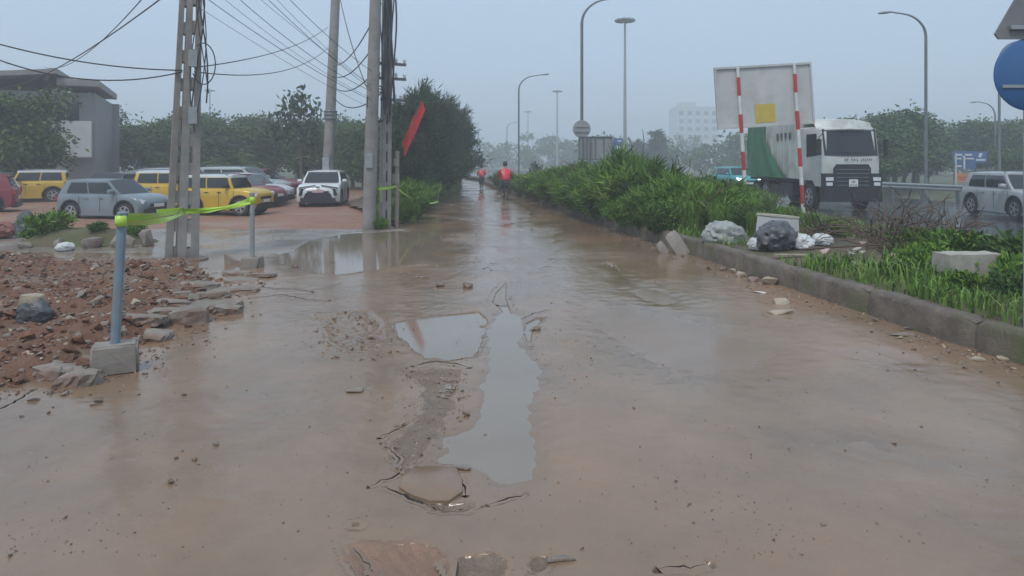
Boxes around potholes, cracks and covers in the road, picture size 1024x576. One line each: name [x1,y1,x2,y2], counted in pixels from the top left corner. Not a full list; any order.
pothole [434,548,514,576]
pothole [390,310,492,361]
crack [652,557,713,576]
pothole [522,316,552,350]
crack [0,388,45,412]
crack [368,423,529,510]
crack [410,360,473,400]
